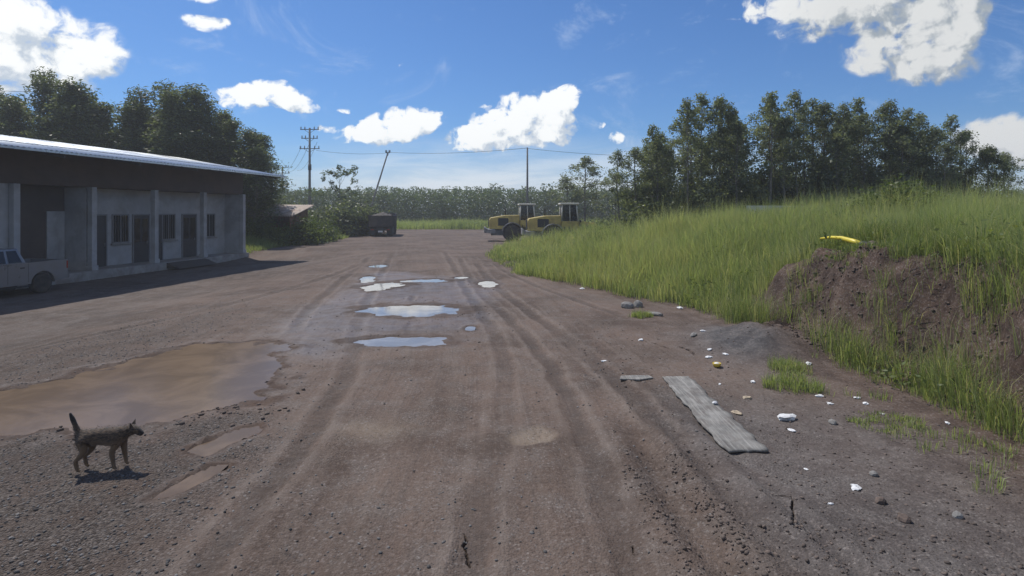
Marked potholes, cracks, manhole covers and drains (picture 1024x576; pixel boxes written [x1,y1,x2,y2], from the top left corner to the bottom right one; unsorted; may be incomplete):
pothole [355,281,409,291]
pothole [353,304,471,317]
crack [762,490,810,536]
pothole [352,335,455,347]
pothole [152,464,229,500]
pothole [185,423,264,457]
crack [448,526,487,576]
